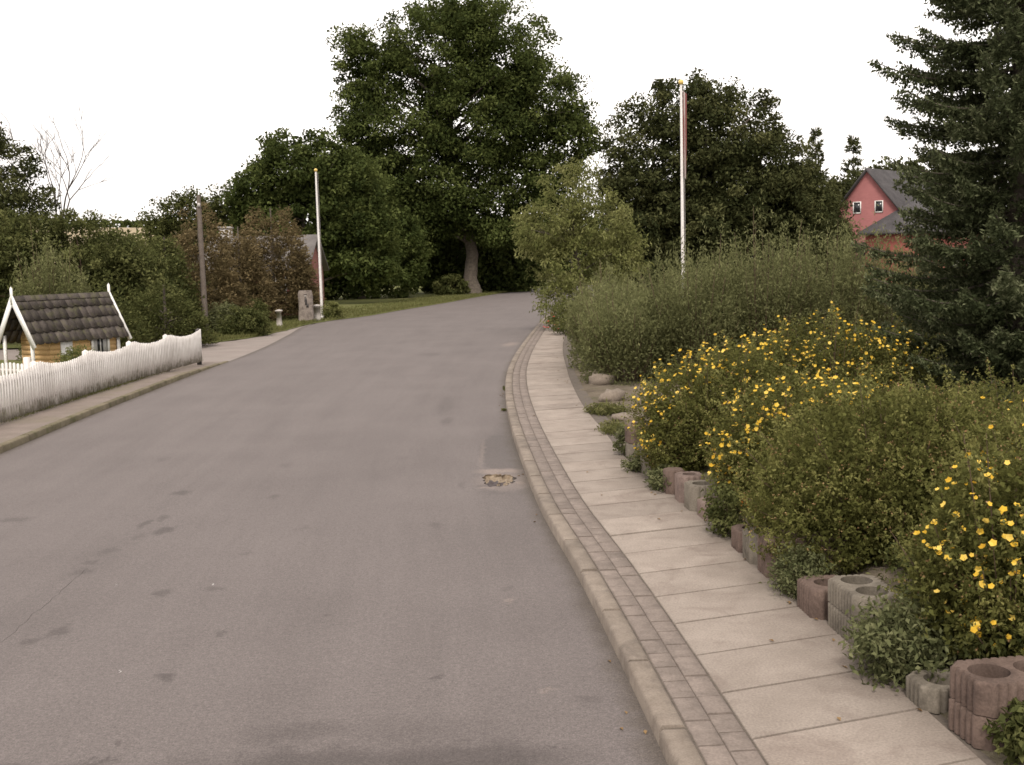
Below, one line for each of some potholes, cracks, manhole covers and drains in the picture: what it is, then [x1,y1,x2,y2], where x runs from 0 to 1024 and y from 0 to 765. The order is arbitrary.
pothole [482,474,517,487]
